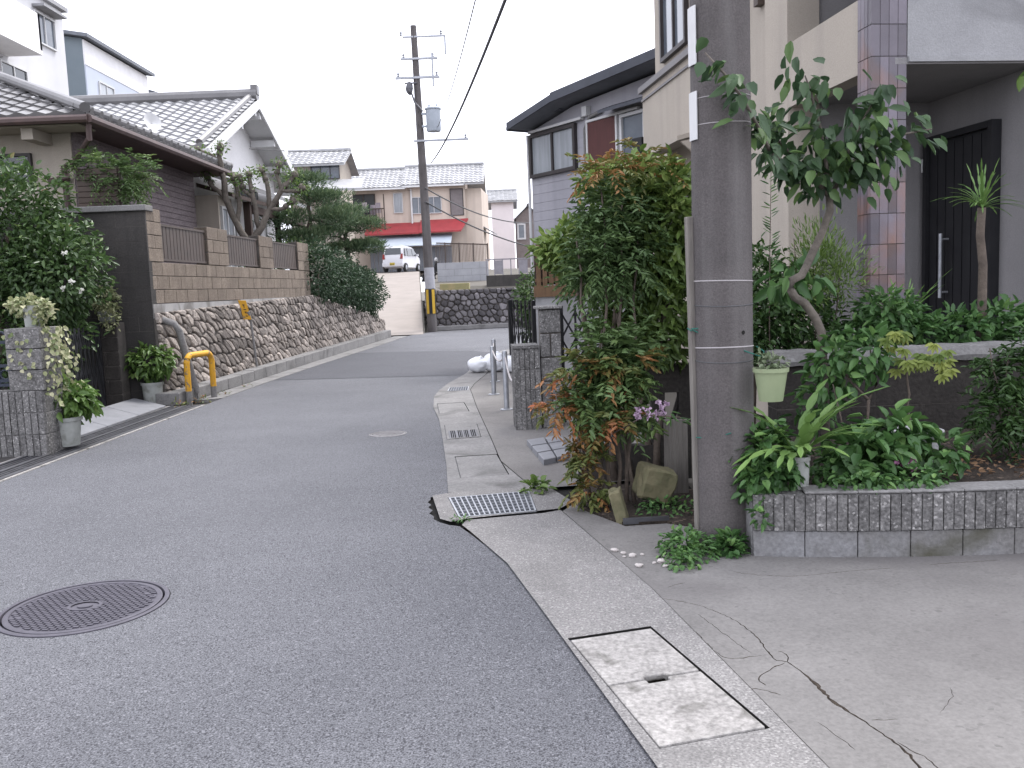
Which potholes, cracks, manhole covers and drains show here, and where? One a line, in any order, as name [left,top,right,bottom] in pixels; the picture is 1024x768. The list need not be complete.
manhole cover [0,579,170,638]
crack [662,583,938,768]
drain grate [449,491,536,517]
